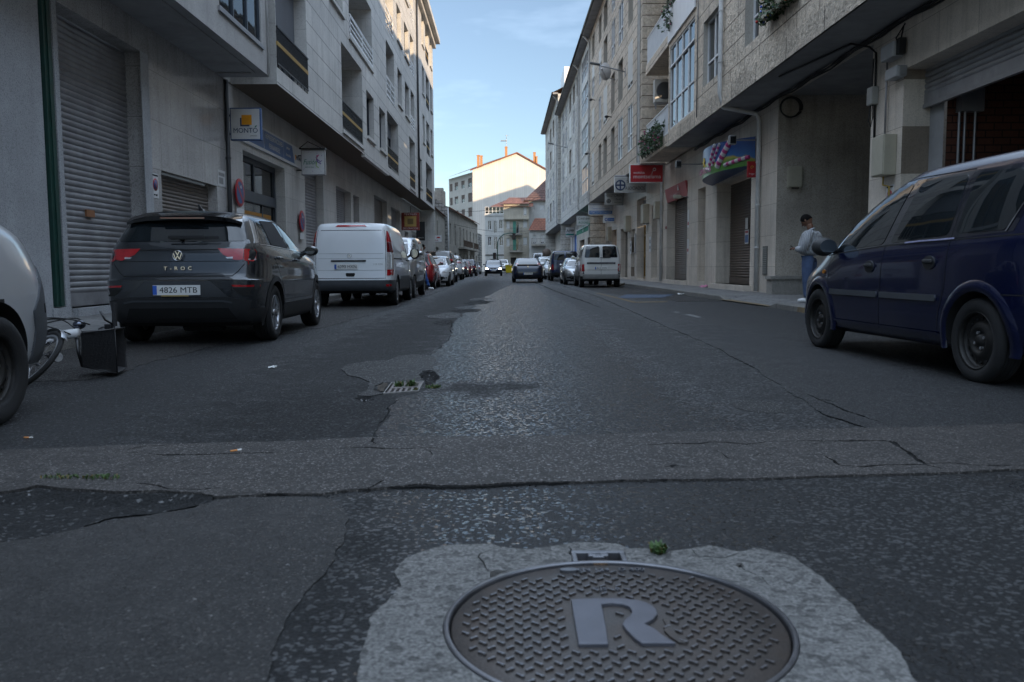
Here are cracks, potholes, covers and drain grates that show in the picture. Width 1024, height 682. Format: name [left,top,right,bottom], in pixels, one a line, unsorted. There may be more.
crack [834,441,926,465]
pothole [419,371,440,385]
drain grate [383,381,424,394]
manhole cover [444,550,799,682]
